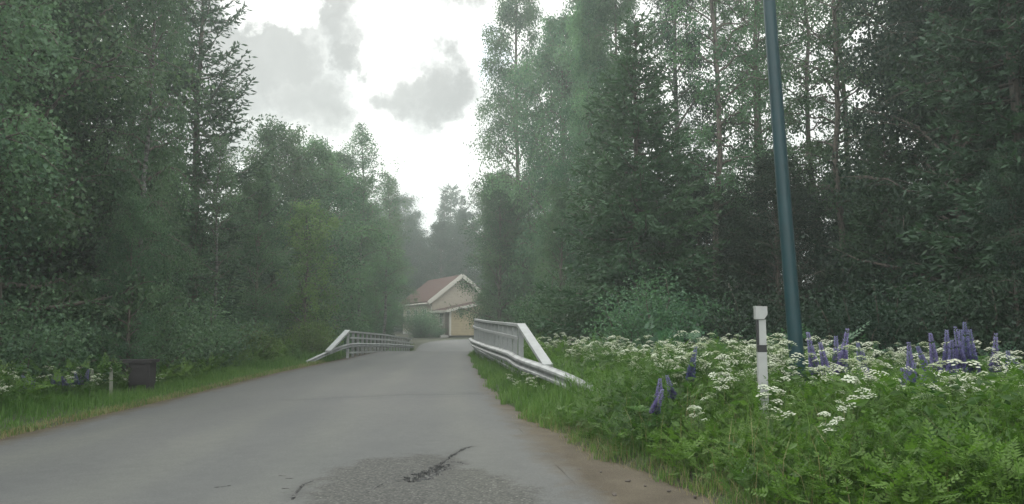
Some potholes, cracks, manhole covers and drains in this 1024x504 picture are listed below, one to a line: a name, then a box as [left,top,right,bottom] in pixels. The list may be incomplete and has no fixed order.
crack [276,475,314,500]
crack [438,446,472,465]
